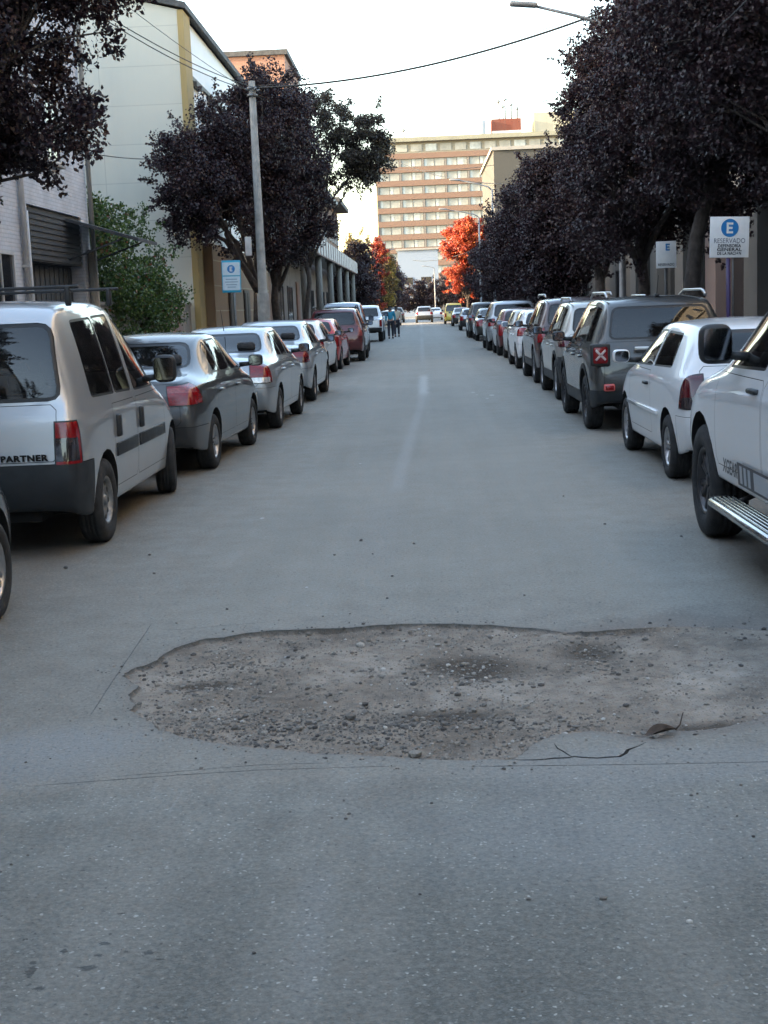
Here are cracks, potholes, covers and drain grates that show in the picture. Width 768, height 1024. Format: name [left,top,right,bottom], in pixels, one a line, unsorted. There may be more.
pothole [28,594,768,807]
crack [513,742,646,760]
